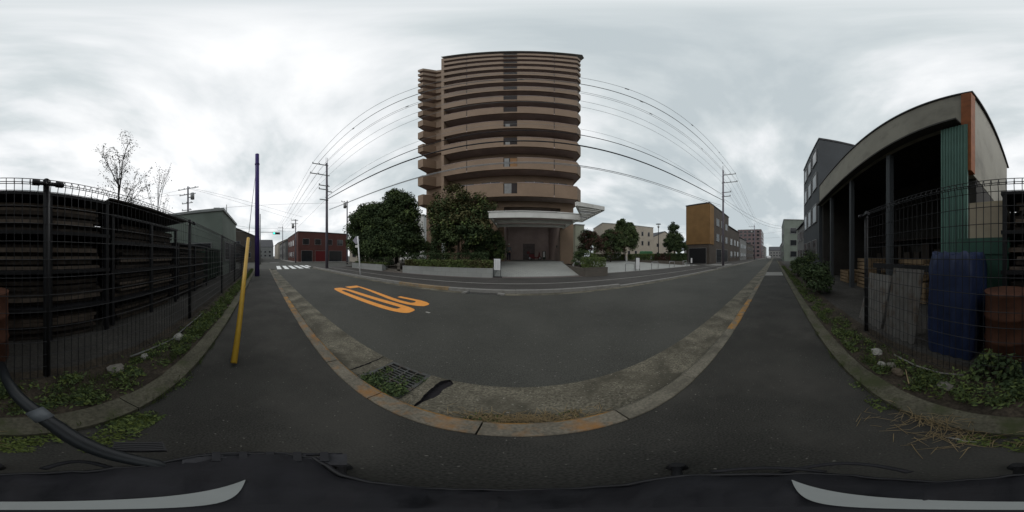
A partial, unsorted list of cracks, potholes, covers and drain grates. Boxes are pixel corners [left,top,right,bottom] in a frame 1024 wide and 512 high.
pothole [406,377,457,411]
drain grate [358,361,431,399]
